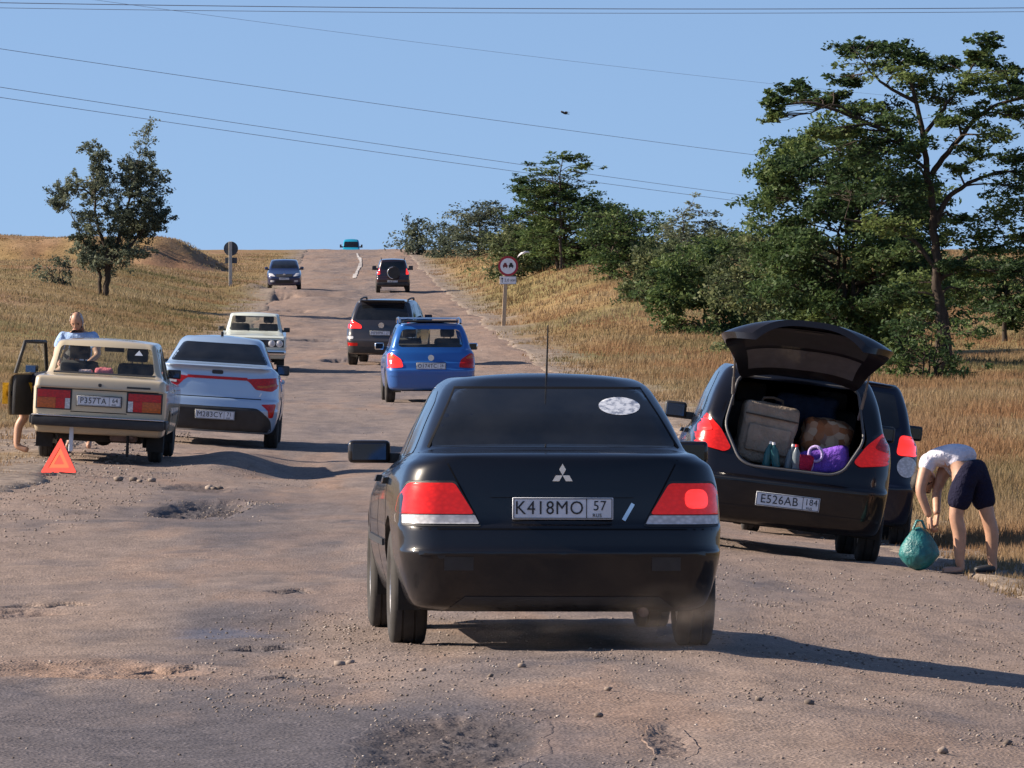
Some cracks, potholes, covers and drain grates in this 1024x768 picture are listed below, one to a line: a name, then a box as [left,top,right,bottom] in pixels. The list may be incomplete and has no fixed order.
pothole [342,710,554,768]
pothole [0,607,78,619]
pothole [245,293,302,301]
pothole [145,498,254,519]
pothole [0,658,216,680]
